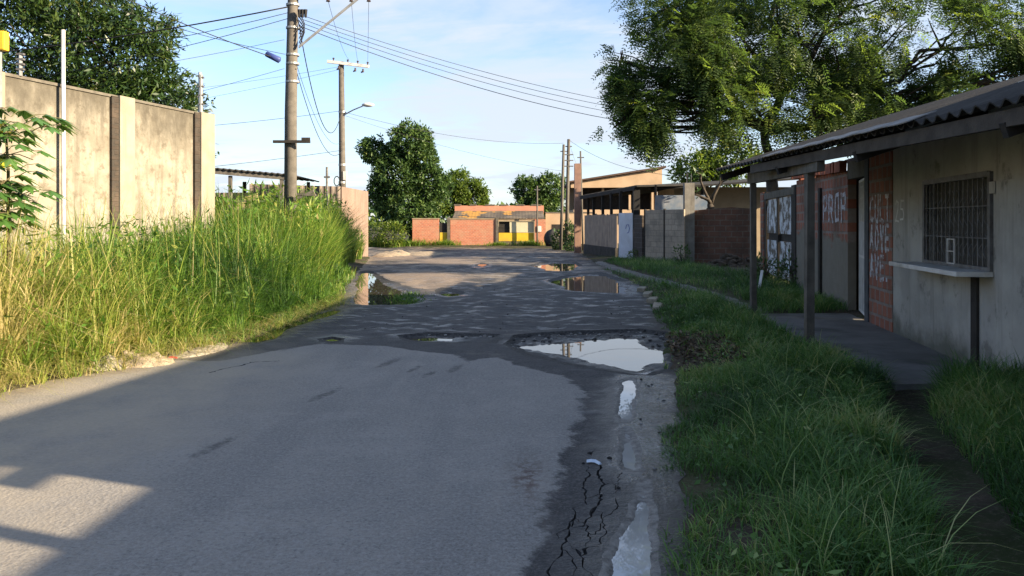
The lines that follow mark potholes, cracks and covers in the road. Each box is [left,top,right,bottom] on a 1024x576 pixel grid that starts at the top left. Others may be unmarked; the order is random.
pothole [397,332,503,343]
pothole [340,271,434,307]
pothole [503,329,678,376]
pothole [434,287,468,303]
pothole [527,261,583,275]
crack [546,453,623,576]
pothole [543,273,641,298]
